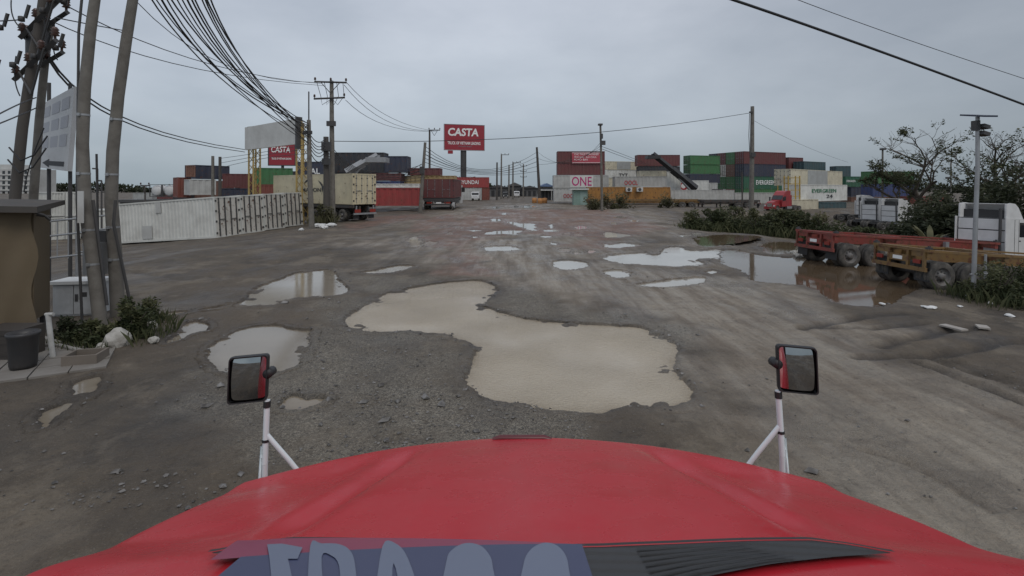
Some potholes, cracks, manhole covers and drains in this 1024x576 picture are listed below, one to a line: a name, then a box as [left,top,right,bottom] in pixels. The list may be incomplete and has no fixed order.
pothole [270,390,339,416]
pothole [541,258,600,272]
pothole [709,247,953,314]
pothole [225,267,361,309]
pothole [348,263,425,276]
pothole [329,278,715,423]
pothole [195,322,322,379]
pothole [20,371,113,434]
pothole [155,318,218,347]
pothole [591,268,642,280]
pothole [687,233,768,248]
pothole [585,245,723,269]
